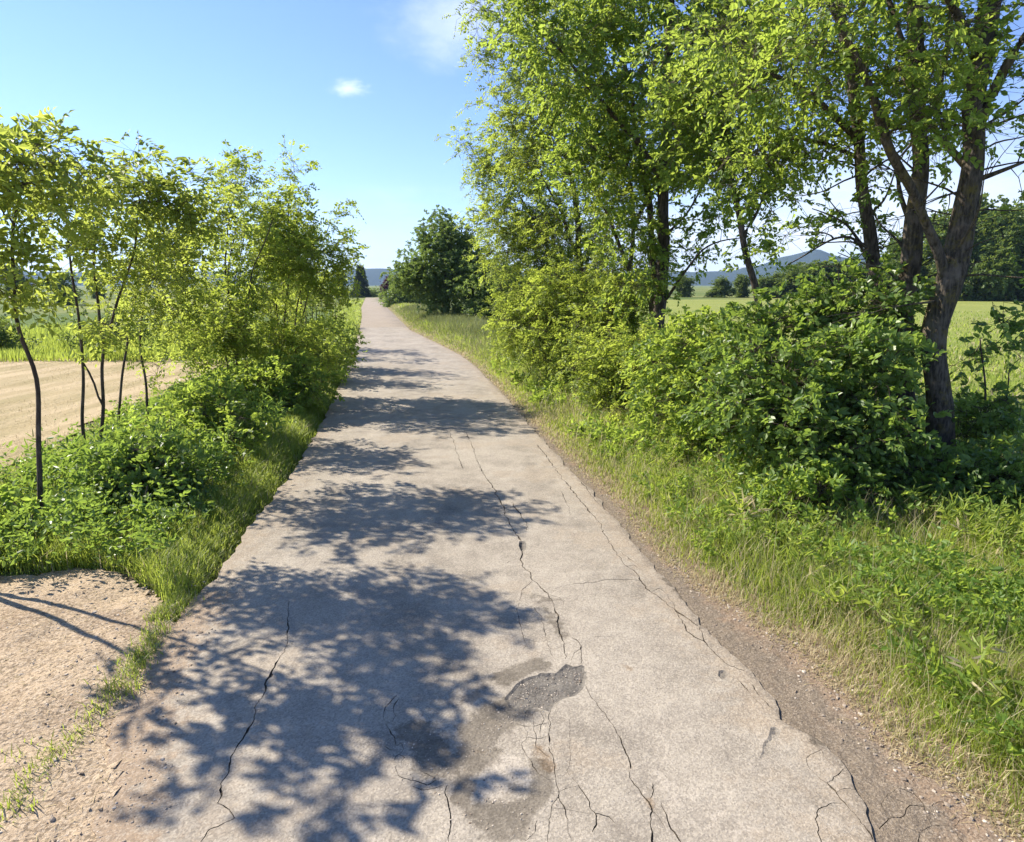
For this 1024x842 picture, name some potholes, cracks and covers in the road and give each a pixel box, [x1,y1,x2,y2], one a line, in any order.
pothole [504,664,587,712]
crack [449,431,610,663]
crack [205,602,289,835]
crack [586,687,681,842]
crack [521,711,613,841]
crack [538,446,744,671]
